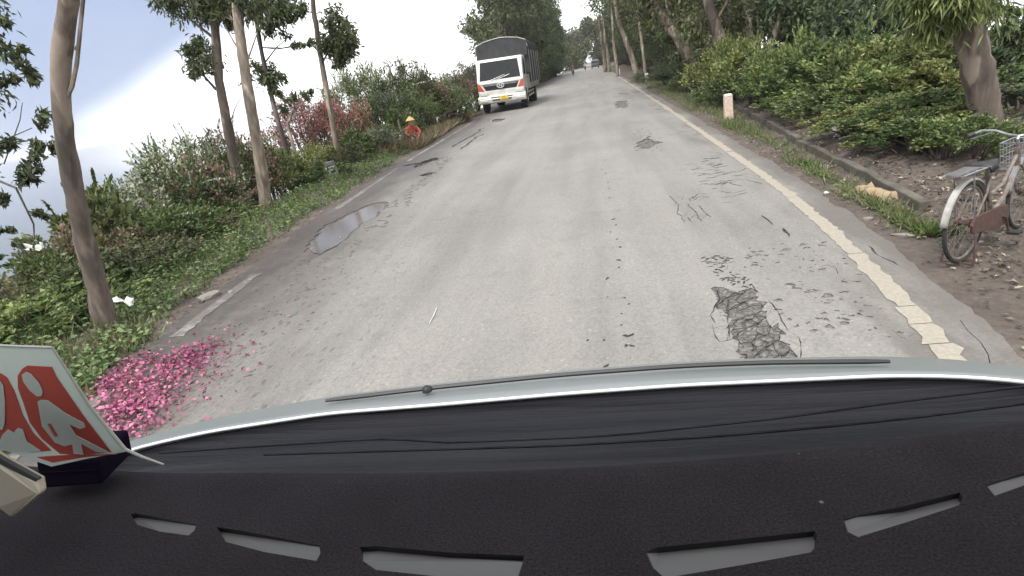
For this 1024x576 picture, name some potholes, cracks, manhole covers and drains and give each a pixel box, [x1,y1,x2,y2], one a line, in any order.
pothole [304,201,389,258]
pothole [636,136,664,149]
crack [670,152,761,222]
crack [446,128,484,157]
pothole [711,287,798,359]
